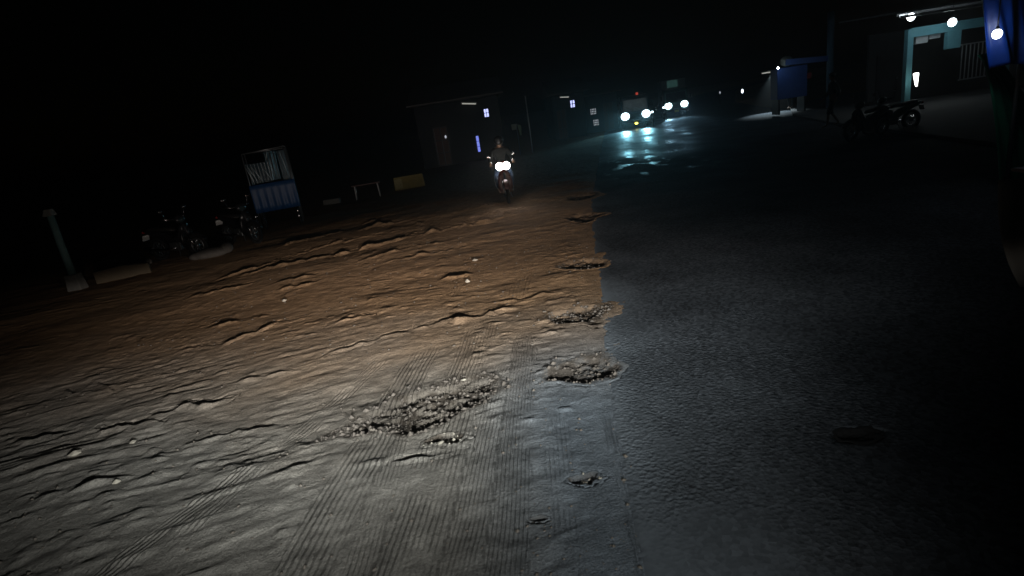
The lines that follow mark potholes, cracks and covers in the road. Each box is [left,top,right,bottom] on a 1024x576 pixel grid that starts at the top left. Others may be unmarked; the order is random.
pothole [565,471,608,488]
pothole [832,425,885,446]
crack [161,212,517,358]
crack [87,390,242,438]
pothole [559,212,611,224]
pothole [420,431,474,450]
pothole [533,301,624,328]
pothole [307,362,523,445]
pothole [532,343,629,386]
pothole [528,514,551,524]
pothole [549,252,611,272]
crack [387,443,474,466]
